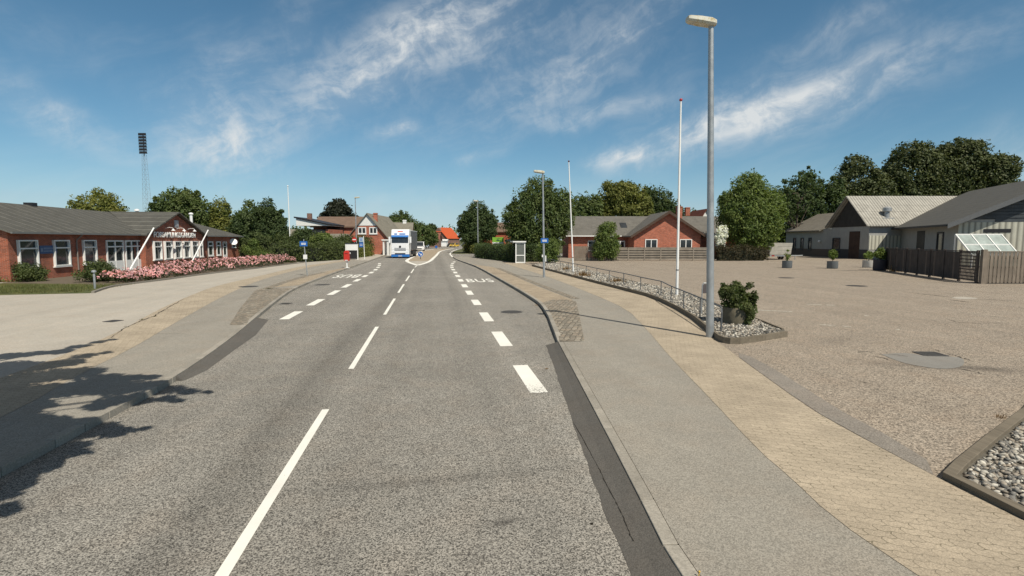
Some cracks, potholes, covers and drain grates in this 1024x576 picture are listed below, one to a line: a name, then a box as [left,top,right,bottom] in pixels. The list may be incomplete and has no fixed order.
crack [575,425,634,541]
